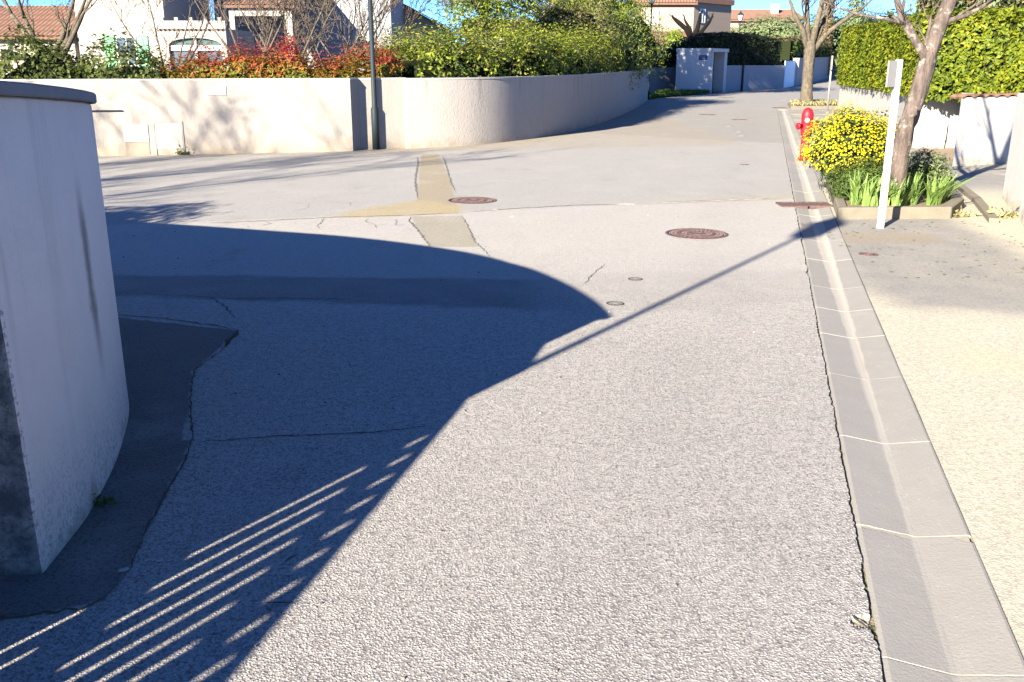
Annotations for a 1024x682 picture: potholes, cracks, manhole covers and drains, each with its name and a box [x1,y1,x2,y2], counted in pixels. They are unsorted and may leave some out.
manhole cover [665,228,728,239]
crack [202,425,436,442]
crack [155,294,369,318]
crack [265,202,430,246]
